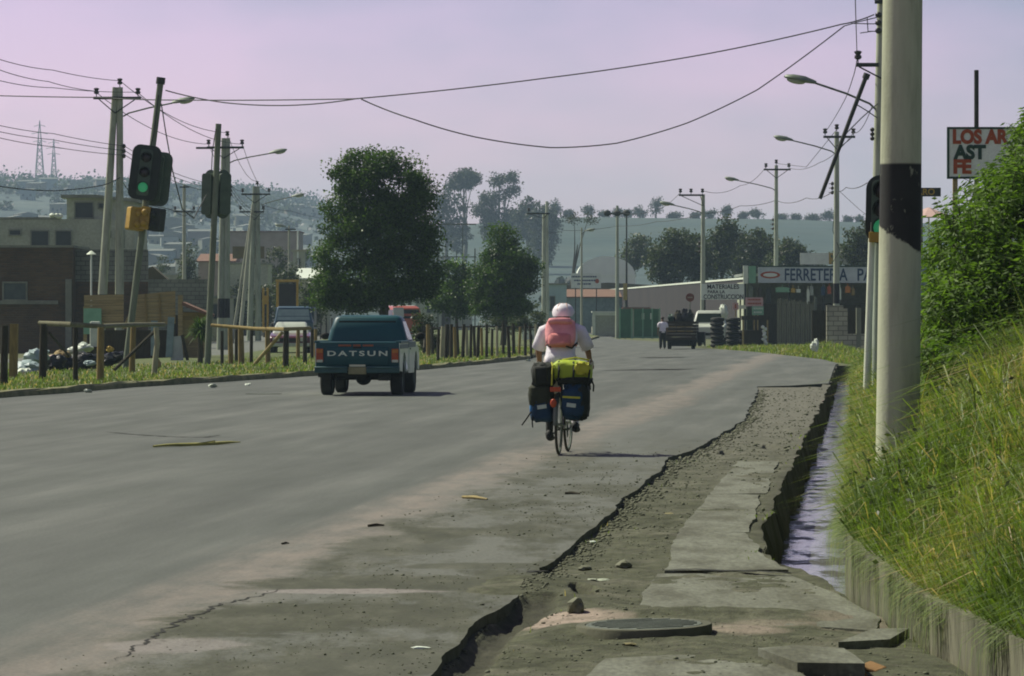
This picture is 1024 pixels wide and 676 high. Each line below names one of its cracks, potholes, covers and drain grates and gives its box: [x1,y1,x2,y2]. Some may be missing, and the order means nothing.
pothole [445,592,561,676]
crack [114,591,276,660]
manhole cover [576,618,712,640]
